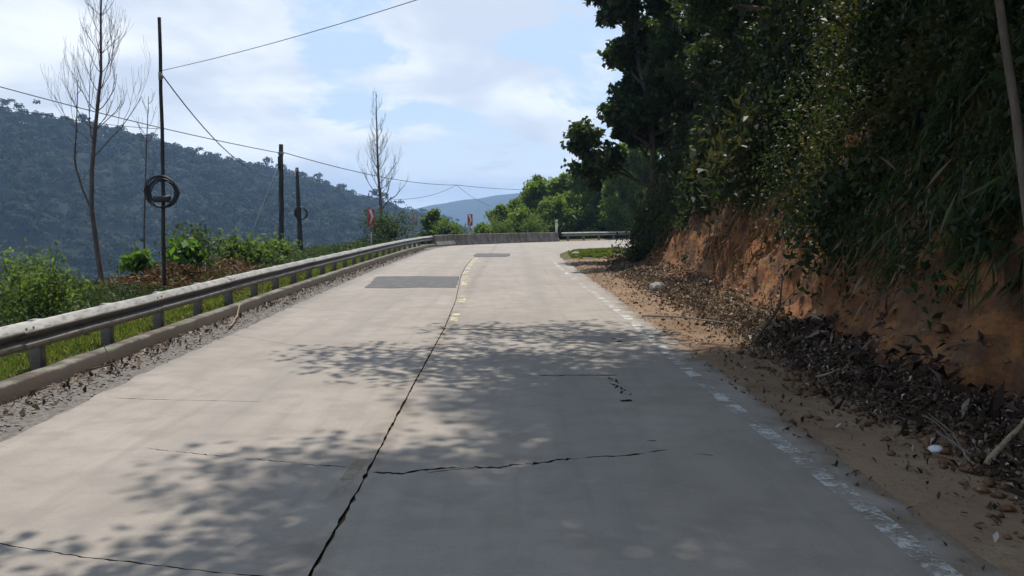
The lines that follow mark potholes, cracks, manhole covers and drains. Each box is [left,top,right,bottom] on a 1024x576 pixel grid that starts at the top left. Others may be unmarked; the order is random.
crack [374,449,708,475]
crack [539,375,631,395]
